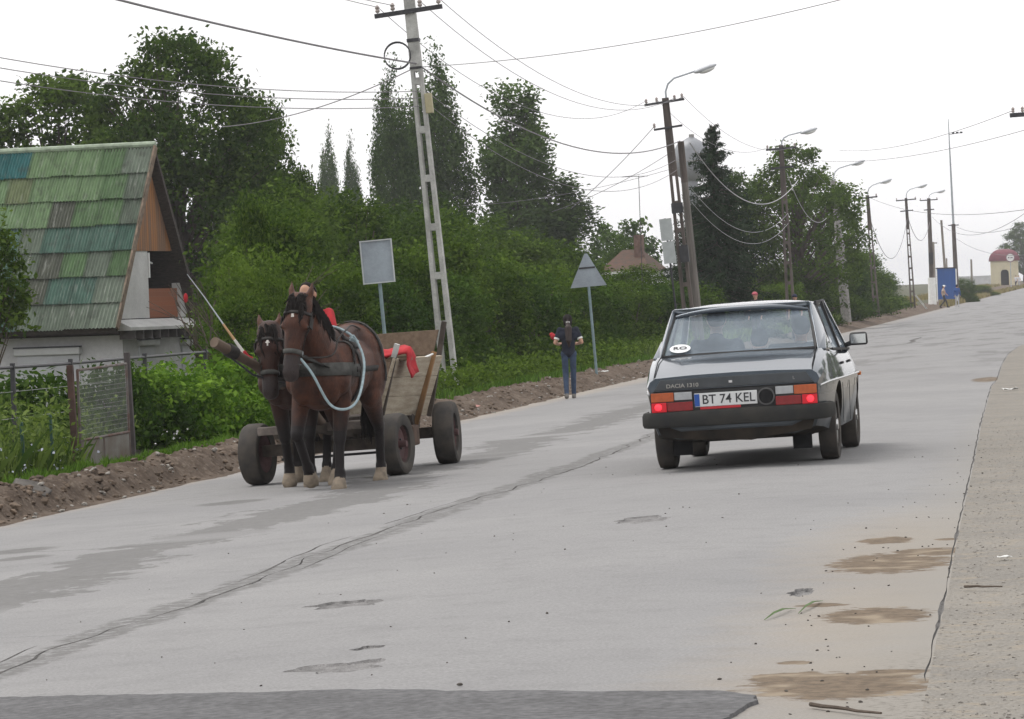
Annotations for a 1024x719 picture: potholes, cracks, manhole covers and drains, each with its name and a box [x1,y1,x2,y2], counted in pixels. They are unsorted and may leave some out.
crack [0,433,651,674]
pothole [614,515,671,524]
pothole [304,599,384,610]
pothole [786,588,815,597]
pothole [283,658,386,674]
